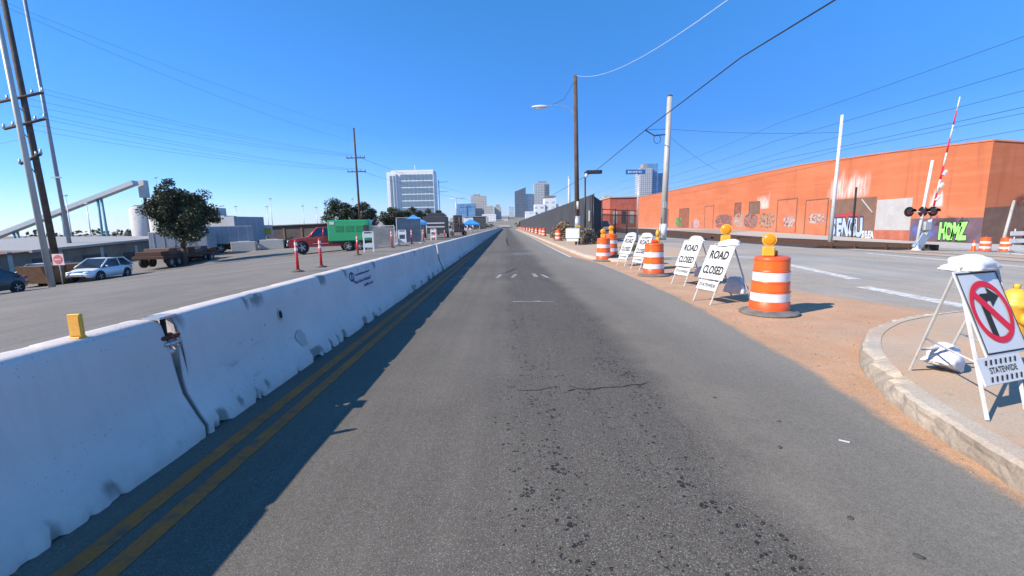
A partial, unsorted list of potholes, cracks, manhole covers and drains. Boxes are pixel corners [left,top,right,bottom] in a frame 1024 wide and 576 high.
crack [540,382,648,391]
